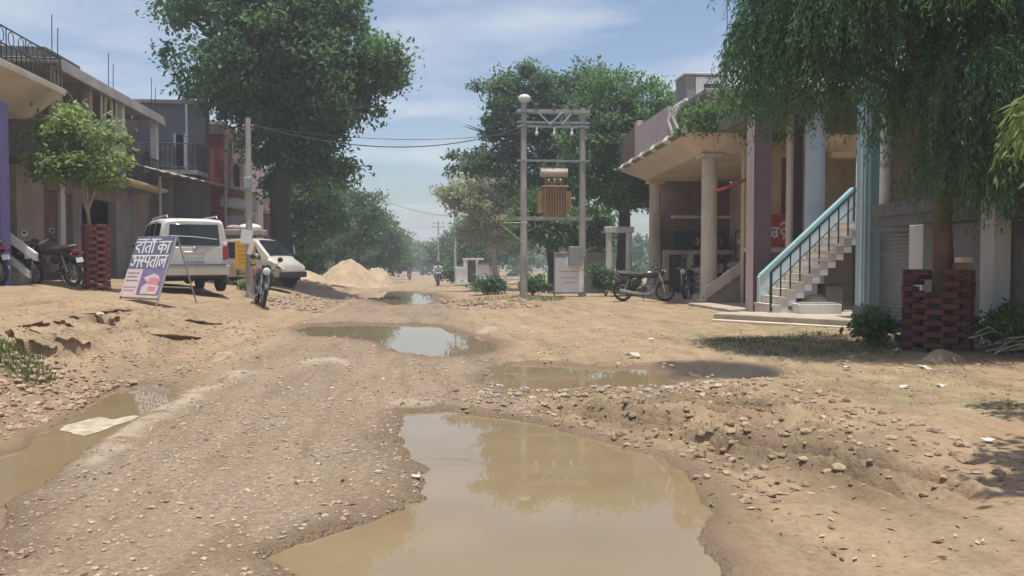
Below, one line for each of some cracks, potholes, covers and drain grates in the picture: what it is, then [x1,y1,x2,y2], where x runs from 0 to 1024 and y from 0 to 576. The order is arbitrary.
pothole [0,381,176,562]
pothole [255,408,735,576]
pothole [479,361,701,391]
pothole [292,322,503,357]
pothole [356,291,440,305]
